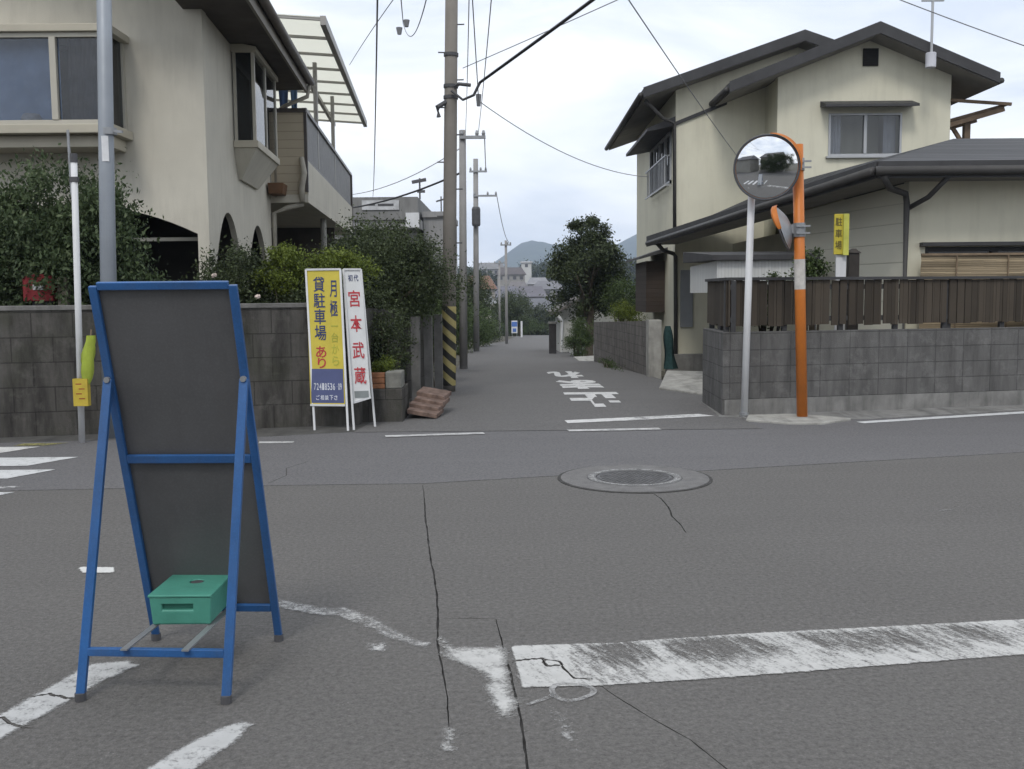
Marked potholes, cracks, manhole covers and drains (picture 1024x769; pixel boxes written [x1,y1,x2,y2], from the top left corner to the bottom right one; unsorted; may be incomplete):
manhole cover [558,465,713,494]
crack [423,490,574,769]
crack [600,685,727,769]
